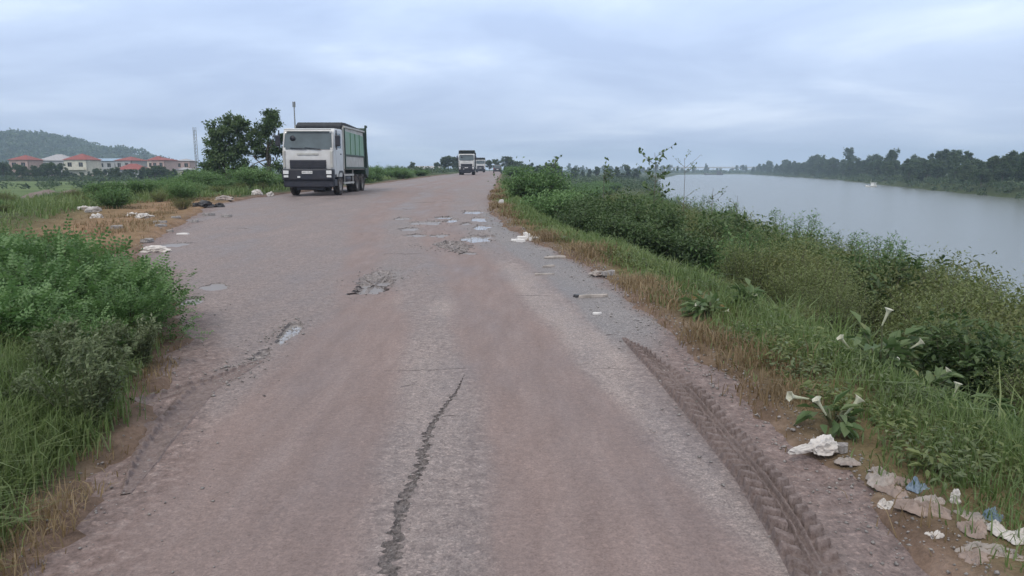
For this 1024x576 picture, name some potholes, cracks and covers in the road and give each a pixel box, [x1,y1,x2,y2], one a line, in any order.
pothole [346,270,397,295]
pothole [274,321,304,346]
pothole [198,282,230,291]
pothole [431,240,472,254]
crack [377,368,466,576]
pothole [460,234,496,243]
